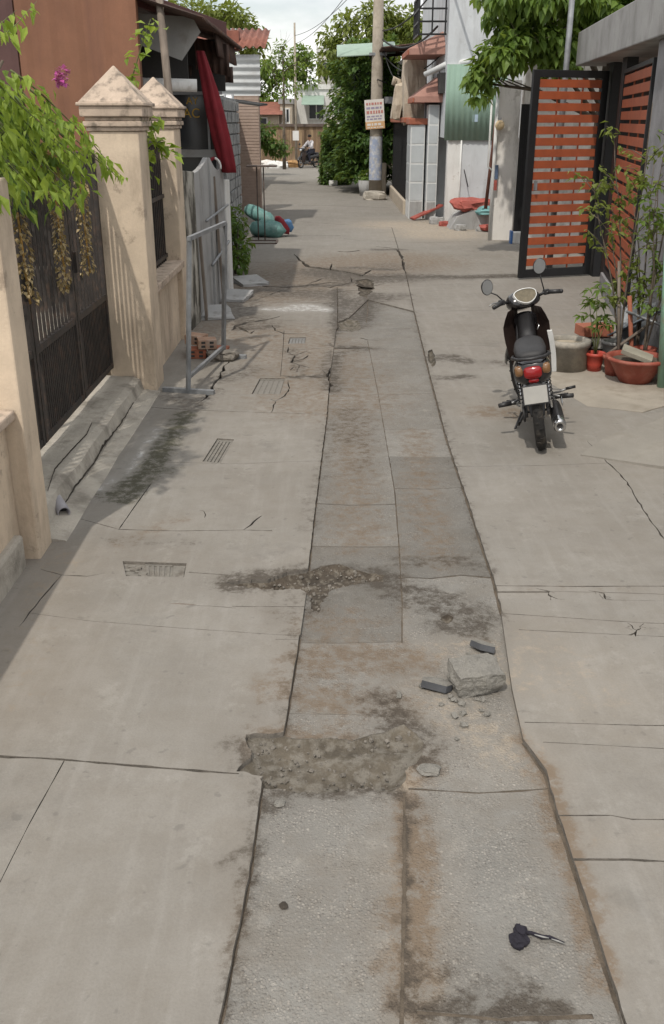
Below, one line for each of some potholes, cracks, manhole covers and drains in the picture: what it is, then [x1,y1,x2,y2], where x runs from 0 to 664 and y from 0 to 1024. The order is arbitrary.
pothole [241,724,424,794]
crack [297,258,373,289]
pothole [237,564,384,612]
